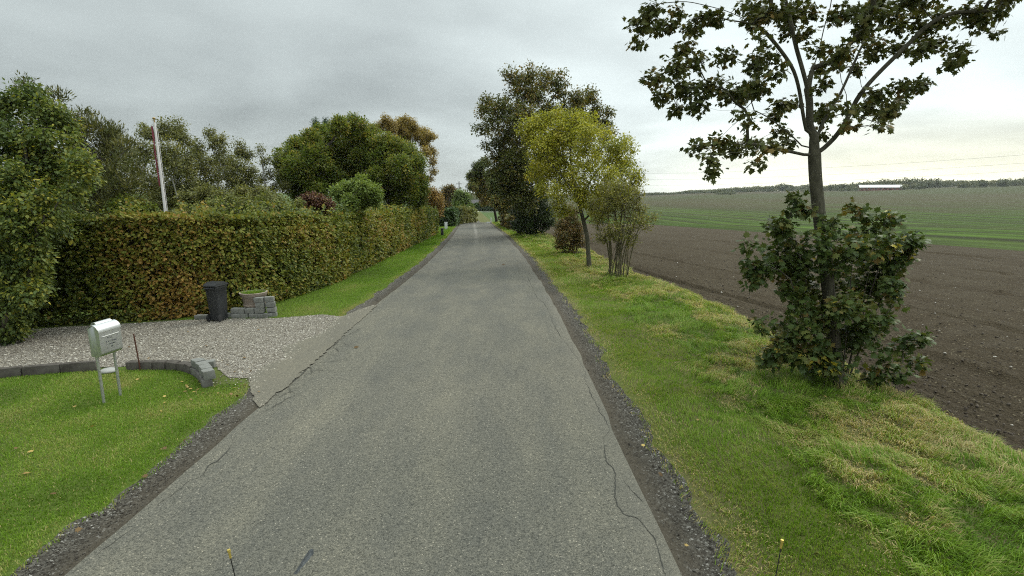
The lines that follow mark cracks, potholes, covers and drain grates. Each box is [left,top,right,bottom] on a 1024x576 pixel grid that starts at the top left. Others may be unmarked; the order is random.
crack [155,446,231,509]
crack [529,281,666,576]
crack [255,328,360,413]
